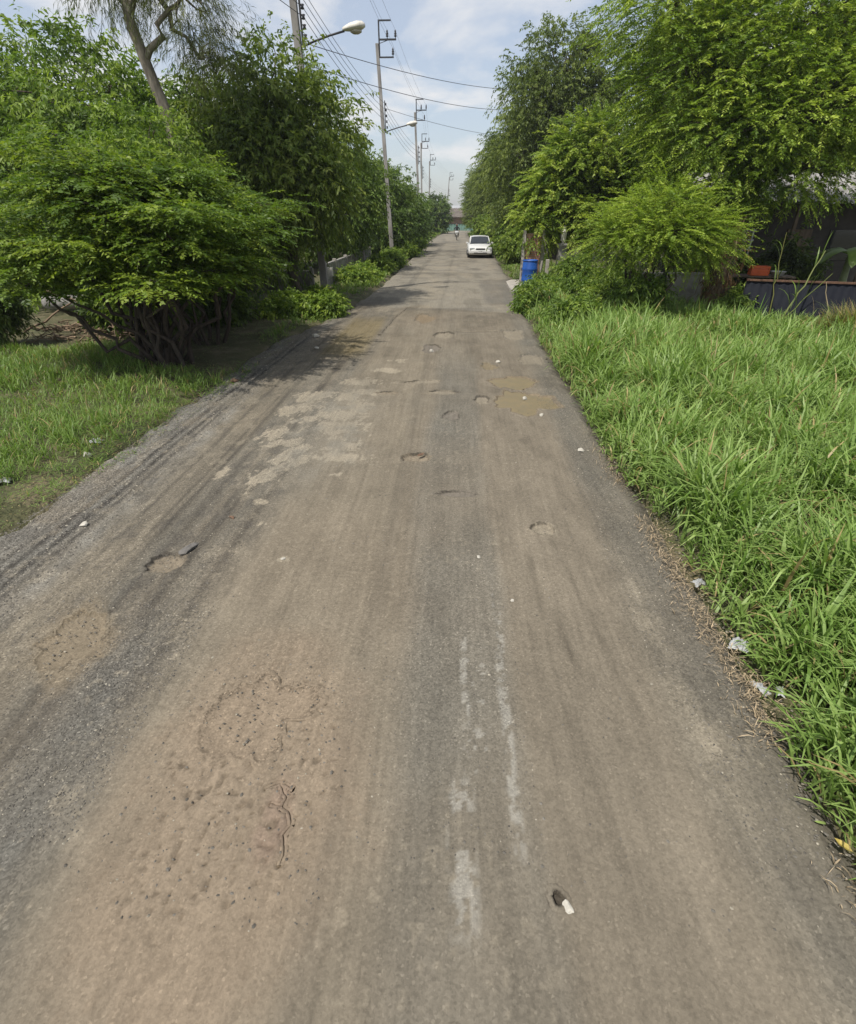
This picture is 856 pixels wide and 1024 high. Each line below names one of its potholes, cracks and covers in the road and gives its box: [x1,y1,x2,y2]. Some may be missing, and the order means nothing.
crack [264,780,295,867]
pothole [138,550,193,577]
pothole [429,331,458,340]
pothole [395,451,438,464]
pothole [470,394,495,407]
pothole [546,883,572,913]
pothole [525,519,561,538]
pothole [27,604,112,678]
pothole [418,343,445,355]
